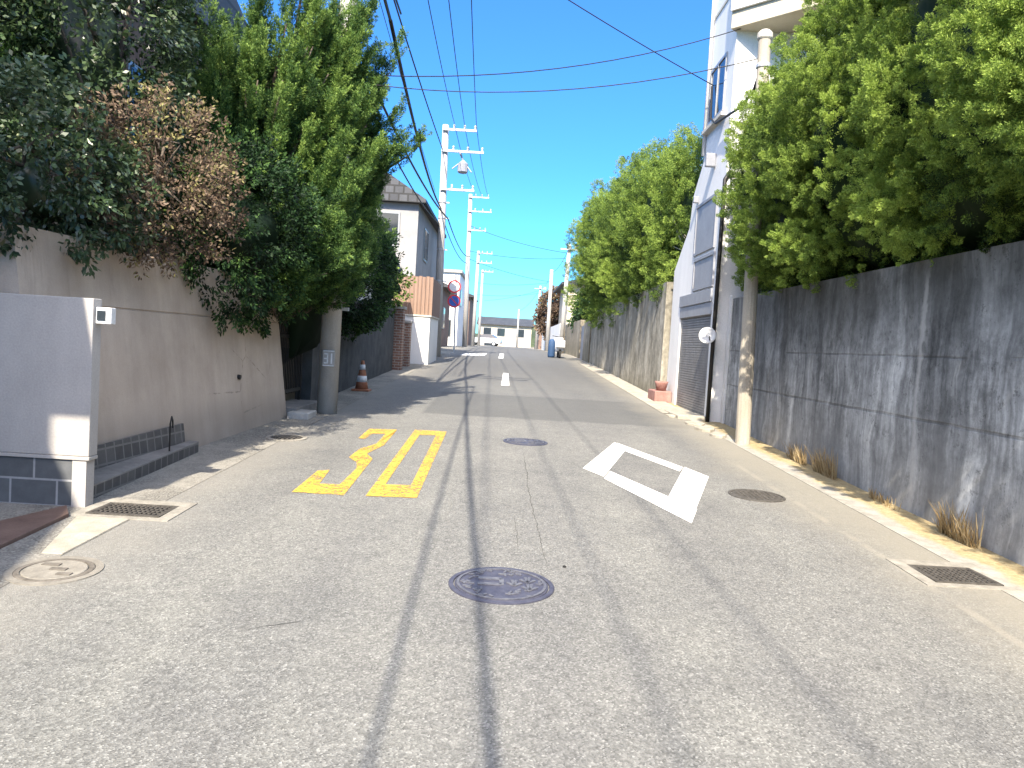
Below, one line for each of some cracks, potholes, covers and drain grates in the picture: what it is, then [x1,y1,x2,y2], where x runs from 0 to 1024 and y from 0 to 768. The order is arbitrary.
drain grate [69,498,198,522]
manhole cover [3,556,104,586]
drain grate [886,558,1024,595]
manhole cover [448,567,554,605]
crack [514,461,547,563]
manhole cover [503,438,548,446]
manhole cover [728,489,786,503]
